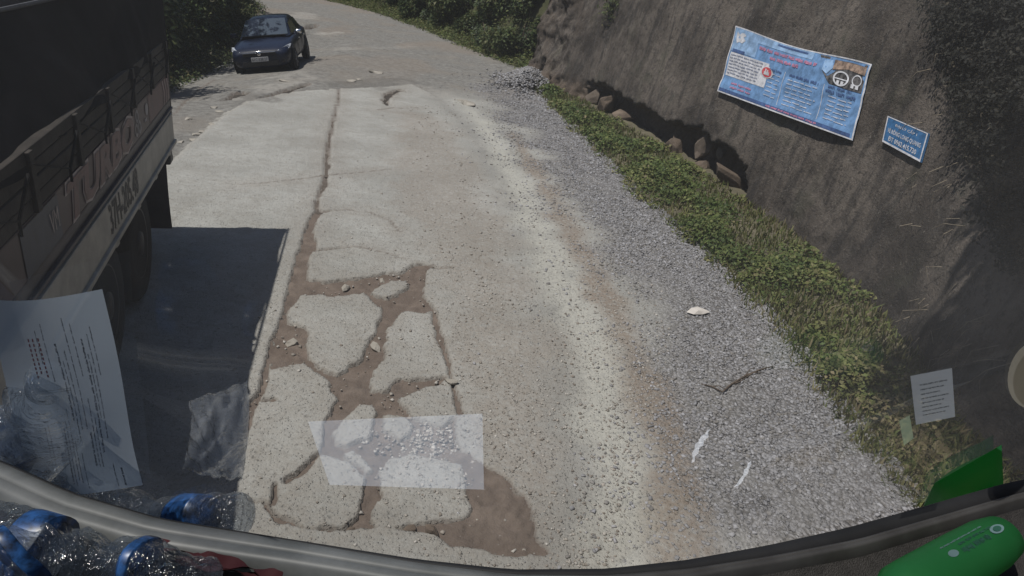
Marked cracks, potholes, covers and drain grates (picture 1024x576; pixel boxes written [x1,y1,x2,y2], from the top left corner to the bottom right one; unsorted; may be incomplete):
crack [239,213,548,557]
